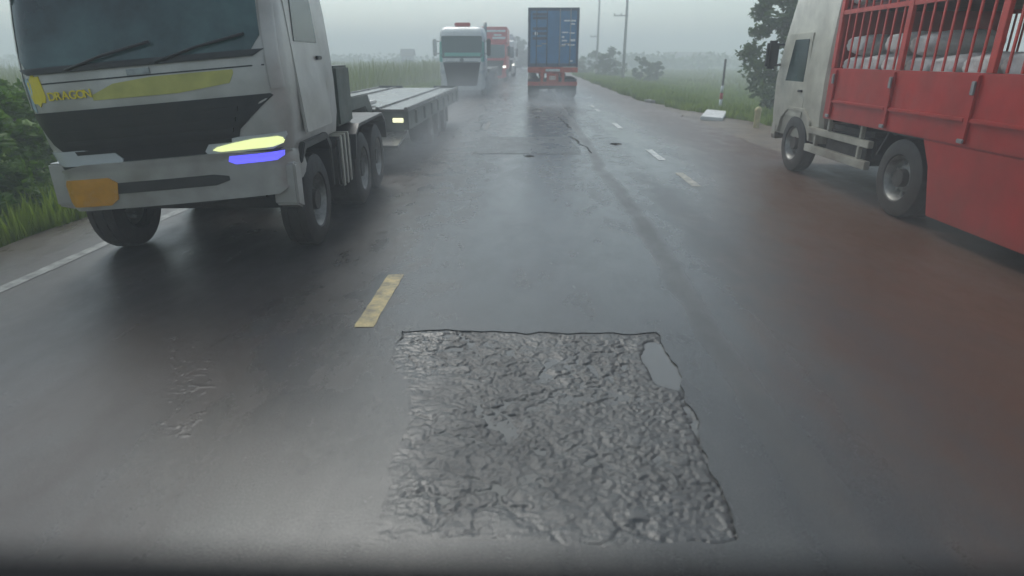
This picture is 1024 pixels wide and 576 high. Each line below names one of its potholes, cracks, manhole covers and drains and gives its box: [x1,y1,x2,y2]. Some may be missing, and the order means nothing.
crack [557,115,615,153]
